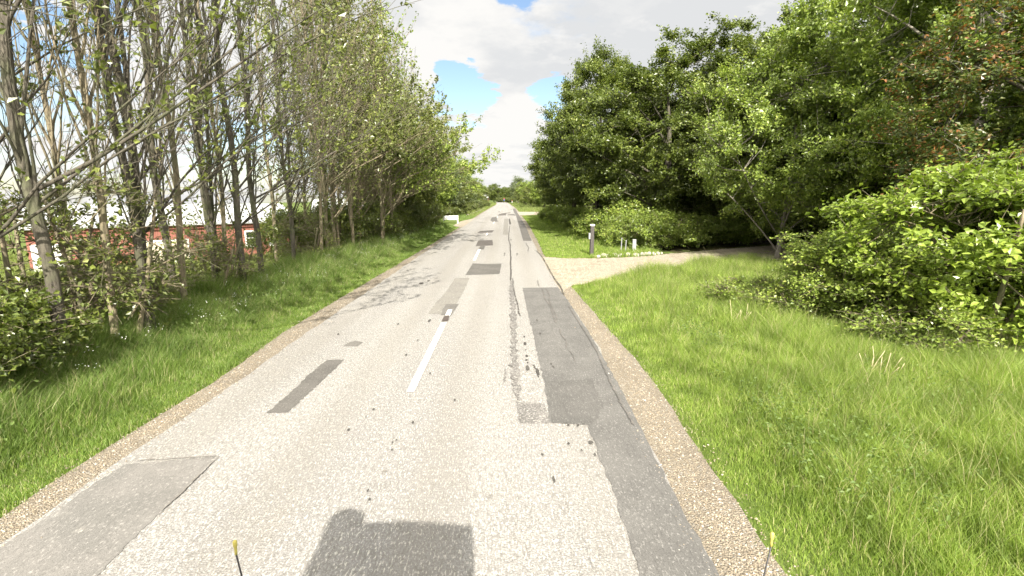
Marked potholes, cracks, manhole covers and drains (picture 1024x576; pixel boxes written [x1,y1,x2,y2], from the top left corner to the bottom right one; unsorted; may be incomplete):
crack [504,219,634,424]
